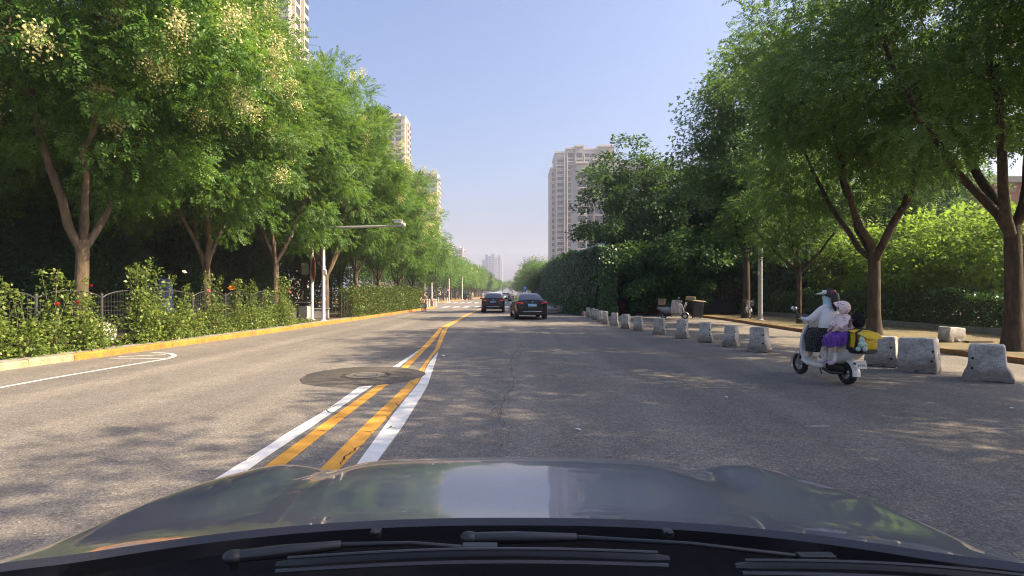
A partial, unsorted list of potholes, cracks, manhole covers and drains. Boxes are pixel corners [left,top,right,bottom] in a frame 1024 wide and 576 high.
manhole cover [340,371,391,379]
